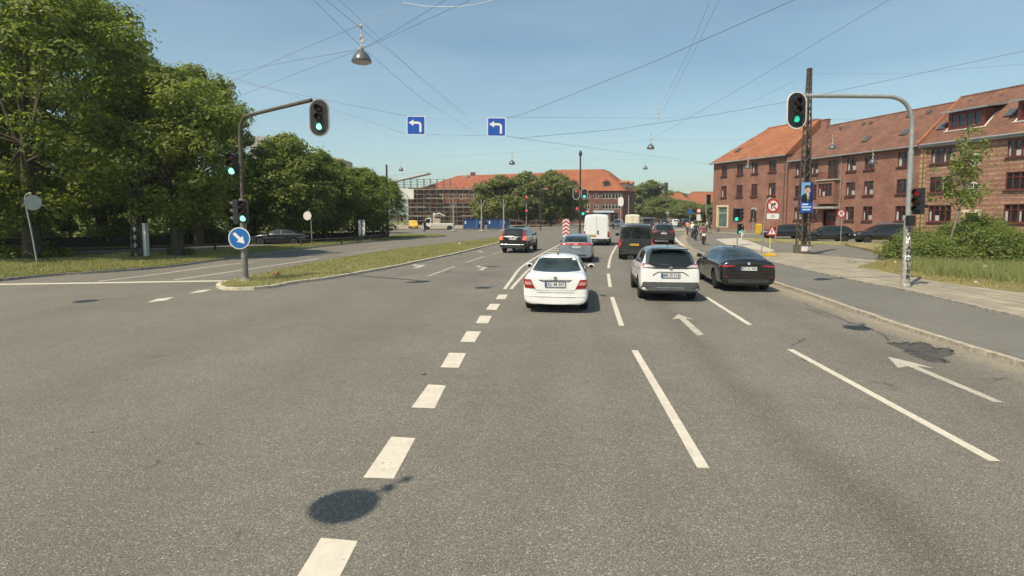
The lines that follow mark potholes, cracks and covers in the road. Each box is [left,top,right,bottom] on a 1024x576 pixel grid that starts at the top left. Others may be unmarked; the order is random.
crack [804,302,900,342]
